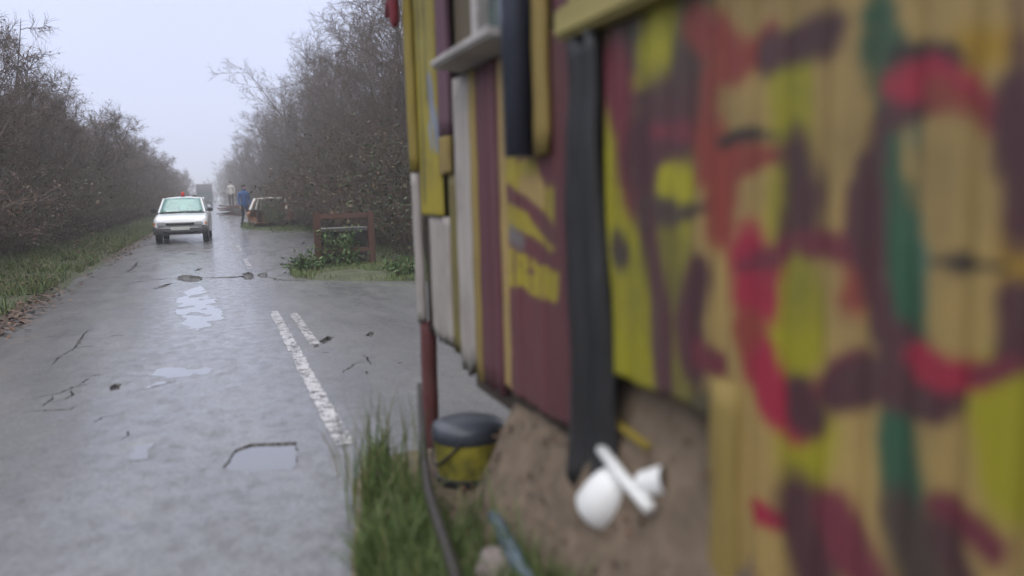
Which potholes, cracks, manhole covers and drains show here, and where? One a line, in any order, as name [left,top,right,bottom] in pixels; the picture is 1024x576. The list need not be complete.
crack [24,331,96,413]
crack [126,262,298,289]
crack [324,352,372,374]
pothole [177,275,203,283]
pothole [223,442,298,471]
